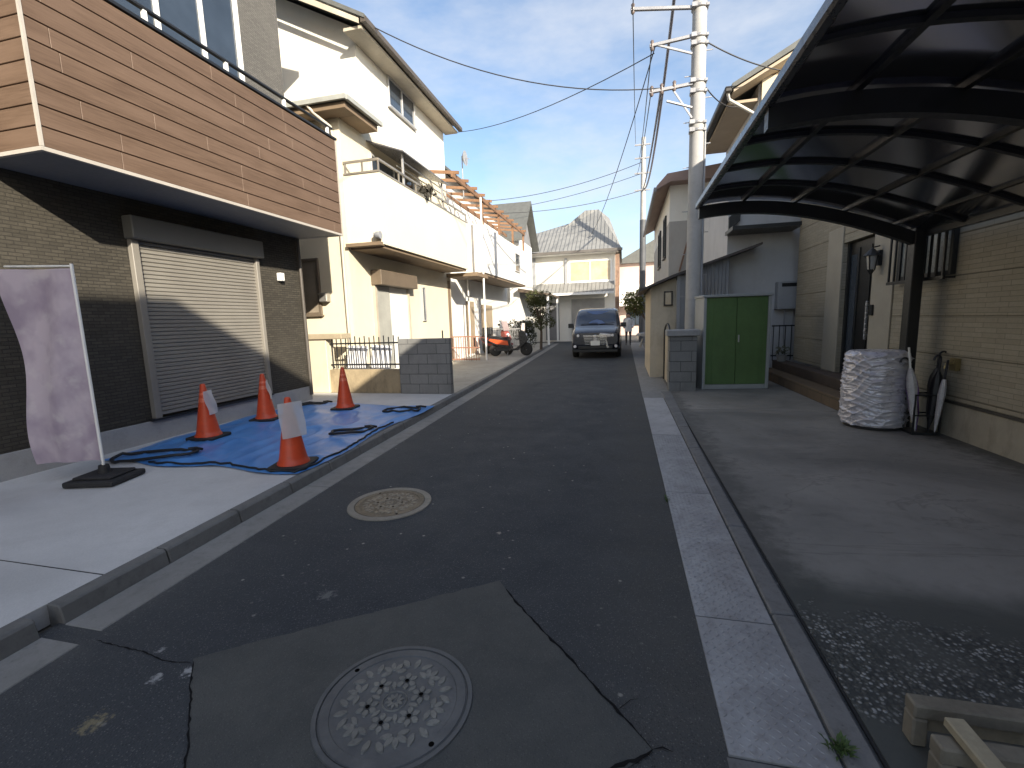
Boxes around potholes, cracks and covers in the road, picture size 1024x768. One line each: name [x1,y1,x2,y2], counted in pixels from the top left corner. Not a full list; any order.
crack [99,640,194,768]
manhole cover [310,646,473,768]
crack [506,589,673,768]
manhole cover [347,488,432,521]
